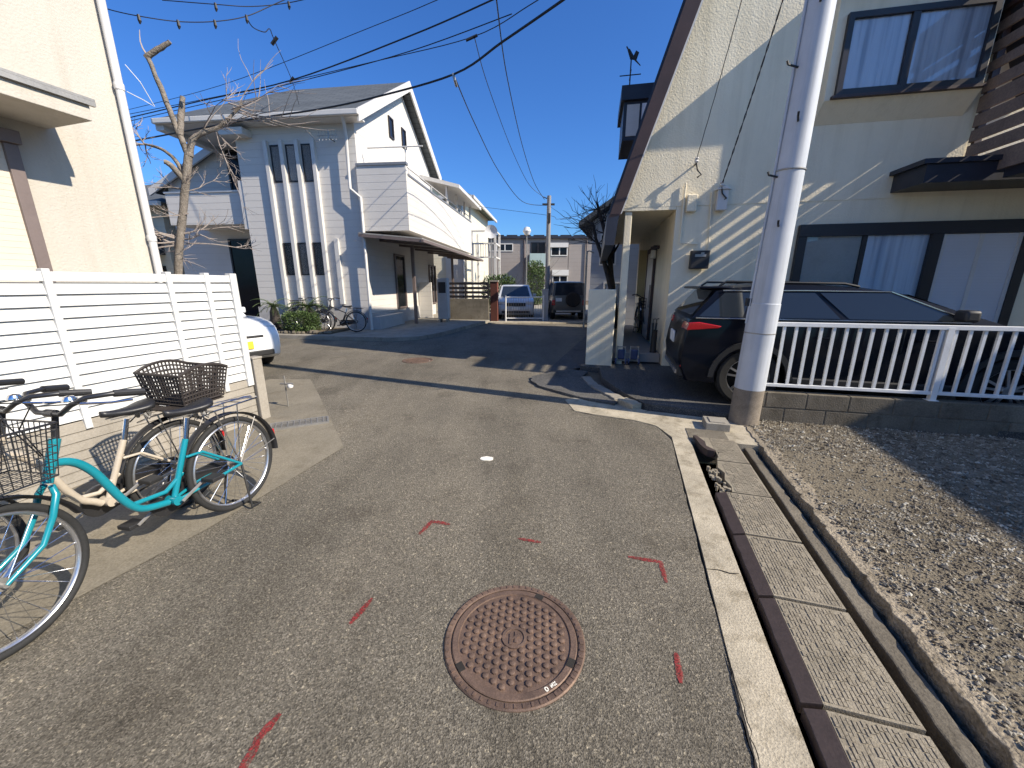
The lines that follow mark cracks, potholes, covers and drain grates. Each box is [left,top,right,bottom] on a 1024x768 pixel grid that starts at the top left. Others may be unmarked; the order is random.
drain grate [270,416,329,431]
manhole cover [444,585,585,713]
